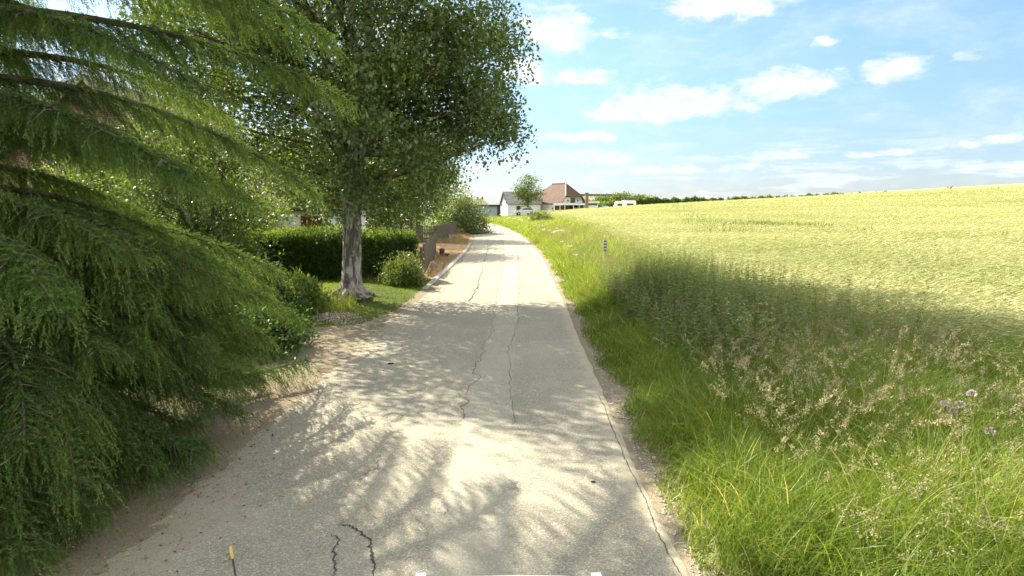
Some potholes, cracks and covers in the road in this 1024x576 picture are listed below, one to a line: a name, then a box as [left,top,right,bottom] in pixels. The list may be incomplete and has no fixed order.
crack [330,459,379,576]
